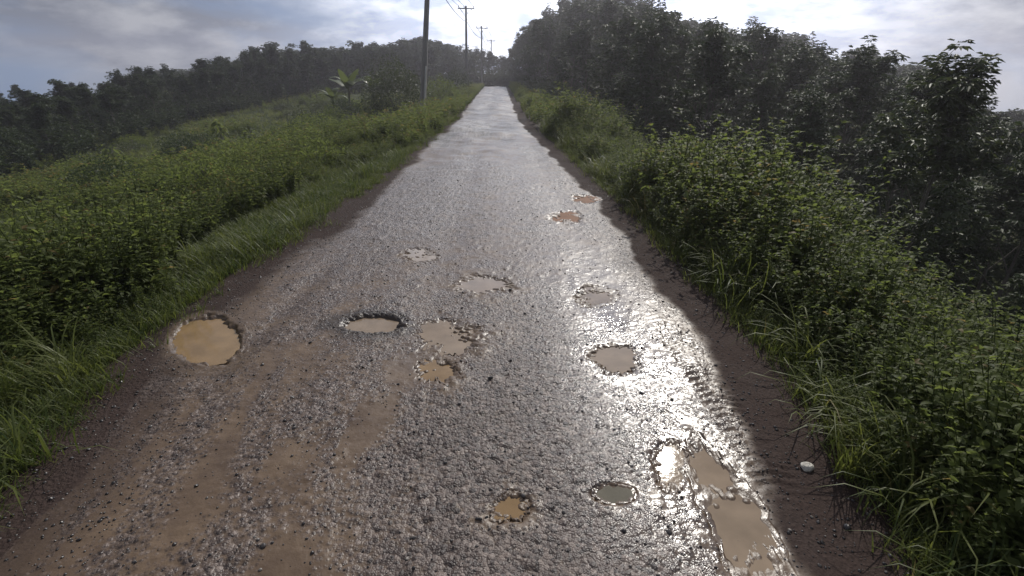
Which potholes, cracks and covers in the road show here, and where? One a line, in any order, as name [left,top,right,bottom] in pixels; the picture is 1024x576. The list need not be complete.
pothole [650,437,689,495]
pothole [411,316,489,363]
pothole [162,310,251,372]
pothole [544,210,583,225]
pothole [679,430,798,576]
pothole [395,247,441,263]
pothole [590,482,638,505]
pothole [332,311,408,335]
pothole [489,488,532,525]
pothole [583,341,642,377]
pothole [573,284,620,308]
pothole [569,194,604,204]
